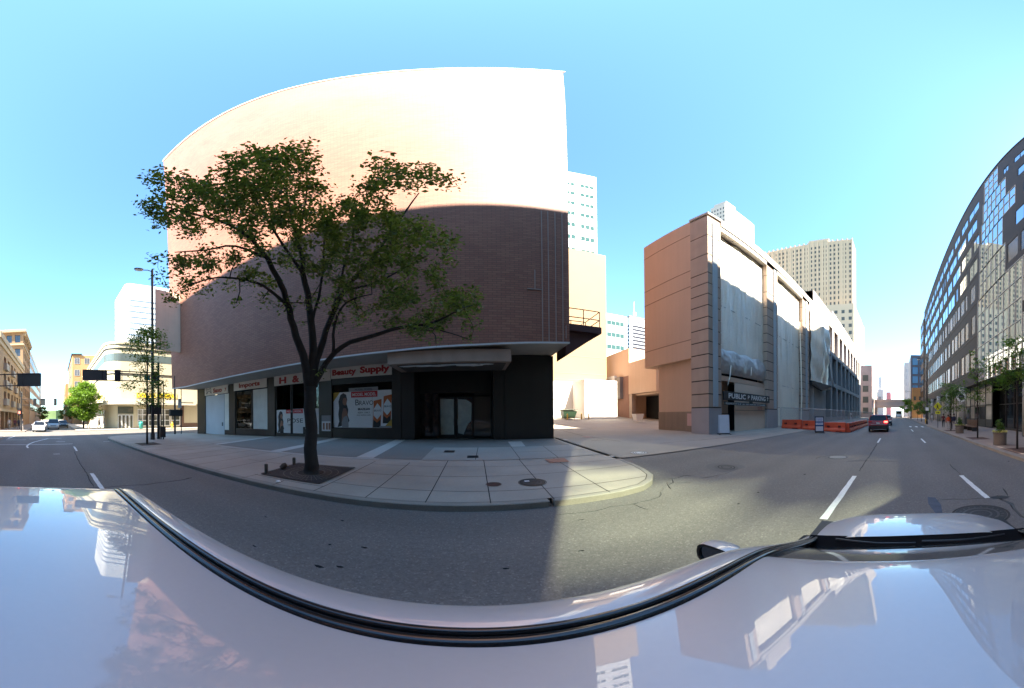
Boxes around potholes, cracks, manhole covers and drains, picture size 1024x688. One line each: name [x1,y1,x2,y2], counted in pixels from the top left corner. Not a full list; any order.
manhole cover [952,505,1010,520]
manhole cover [518,478,547,486]
manhole cover [706,463,745,472]
crack [558,473,726,515]
